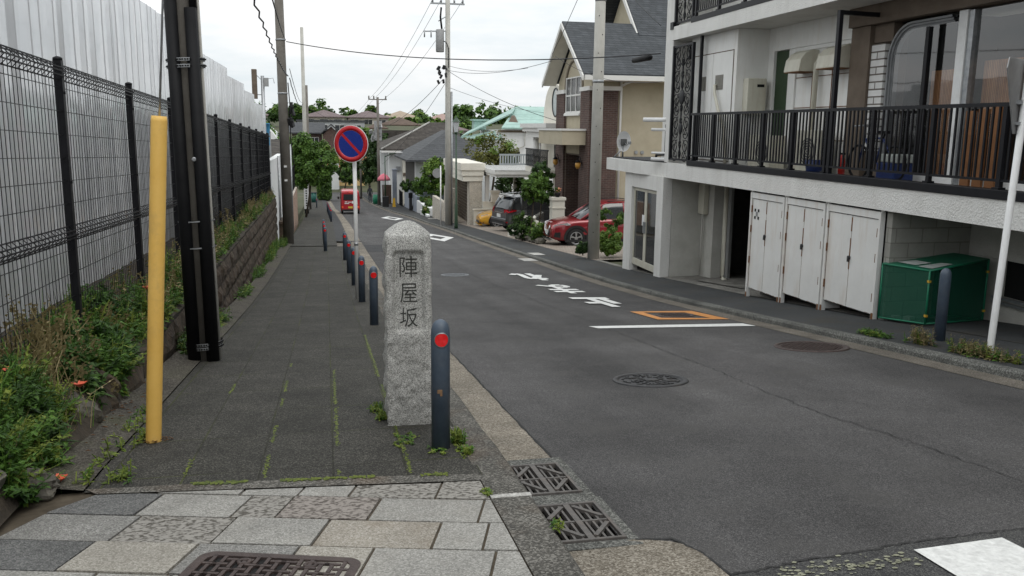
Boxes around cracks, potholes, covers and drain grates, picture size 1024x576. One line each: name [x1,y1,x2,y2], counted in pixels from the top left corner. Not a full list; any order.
drain grate [537,501,627,544]
manhole cover [773,341,850,352]
drain grate [510,462,582,496]
manhole cover [612,373,689,388]
